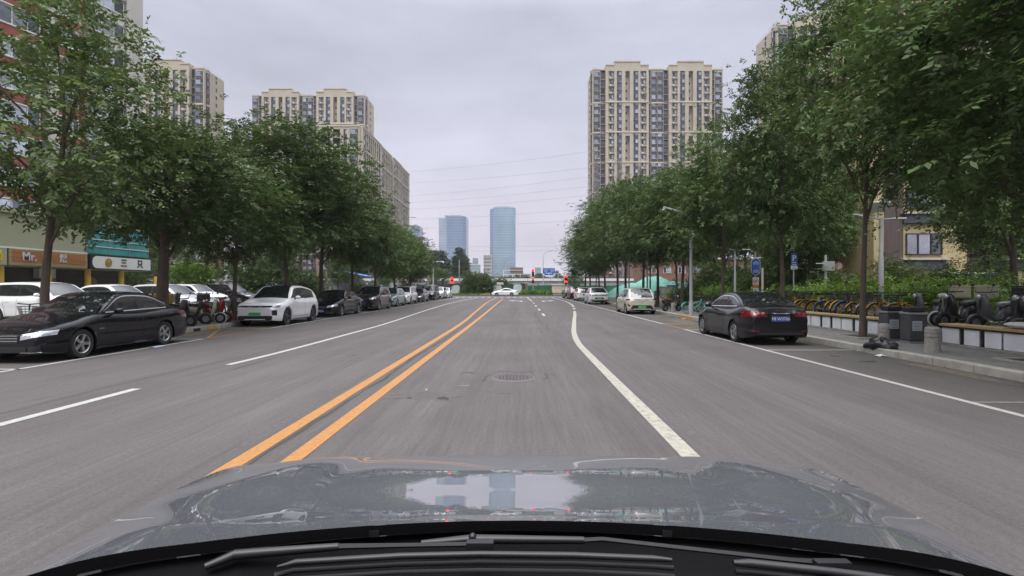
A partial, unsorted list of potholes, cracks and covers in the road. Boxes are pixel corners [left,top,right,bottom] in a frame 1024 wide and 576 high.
manhole cover [487,374,540,383]
